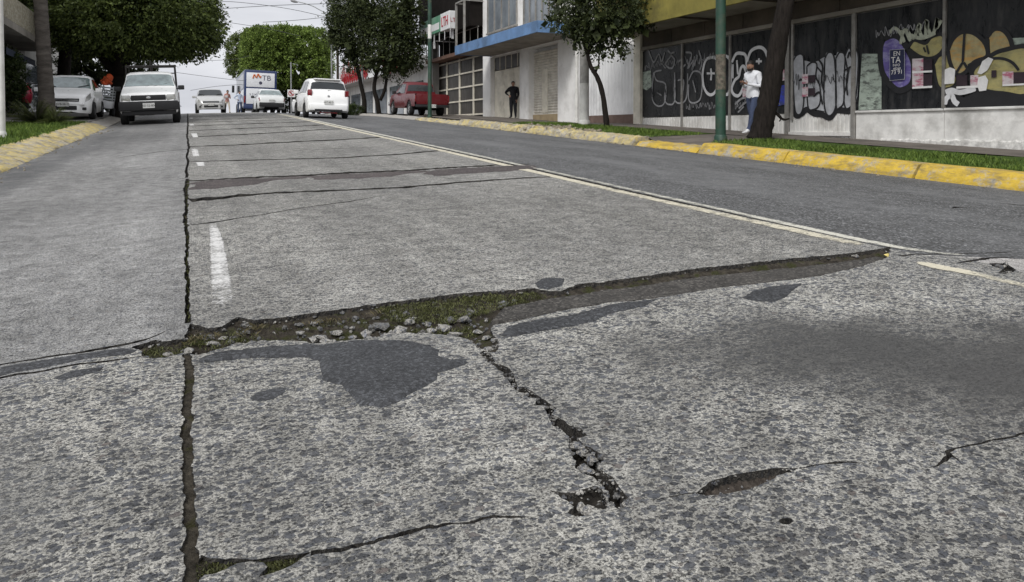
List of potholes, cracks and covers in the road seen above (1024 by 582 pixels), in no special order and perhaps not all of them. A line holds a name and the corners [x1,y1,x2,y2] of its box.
crack [480,350,629,509]
pothole [696,468,798,496]
crack [195,515,524,581]
crack [929,432,1024,468]
crack [192,193,394,225]
